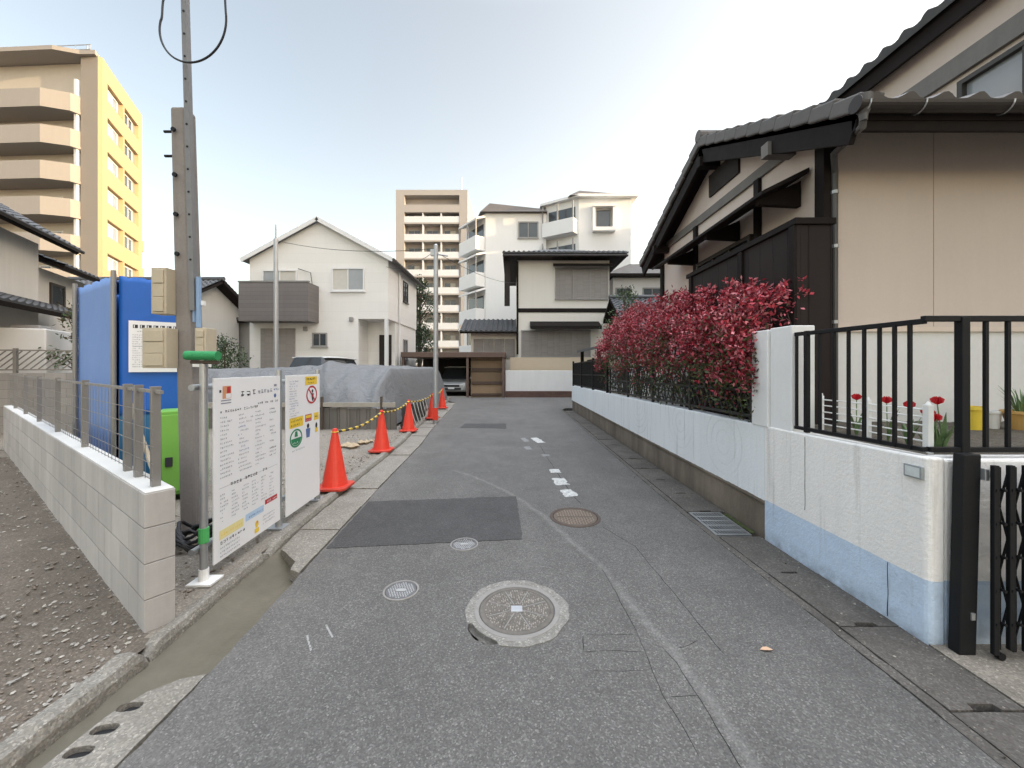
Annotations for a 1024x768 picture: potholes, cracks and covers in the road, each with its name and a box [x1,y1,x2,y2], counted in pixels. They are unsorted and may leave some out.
pothole [468,624,497,645]
manhole cover [550,507,601,528]
drain grate [688,512,752,537]
manhole cover [465,580,569,648]
manhole cover [450,538,478,551]
manhole cover [383,580,419,601]
